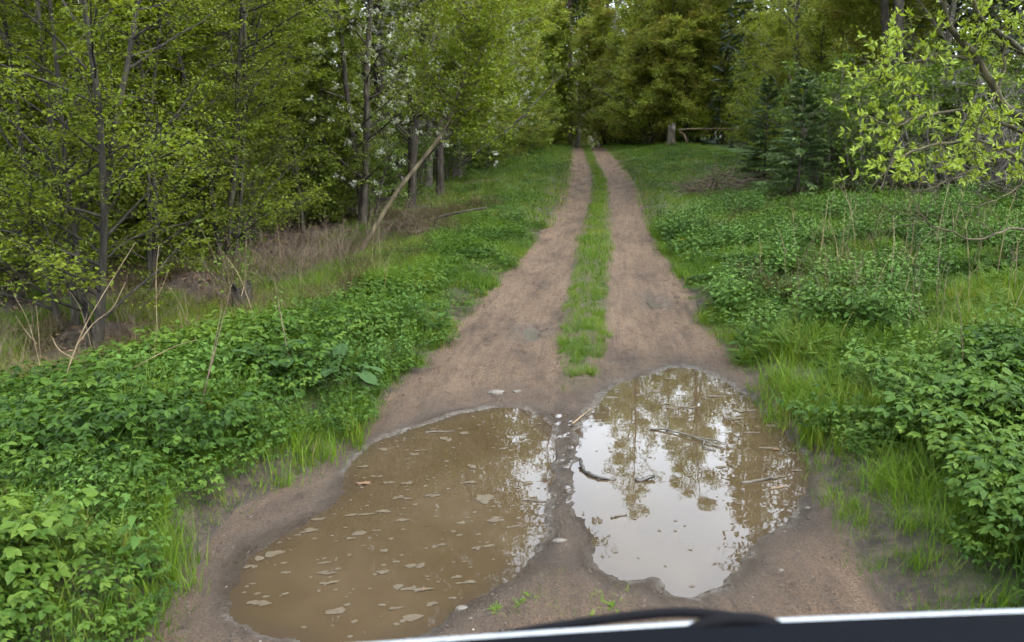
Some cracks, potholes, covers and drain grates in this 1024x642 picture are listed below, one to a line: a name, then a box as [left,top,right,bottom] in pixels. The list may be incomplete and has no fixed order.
pothole [219,404,579,642]
pothole [564,365,818,599]
